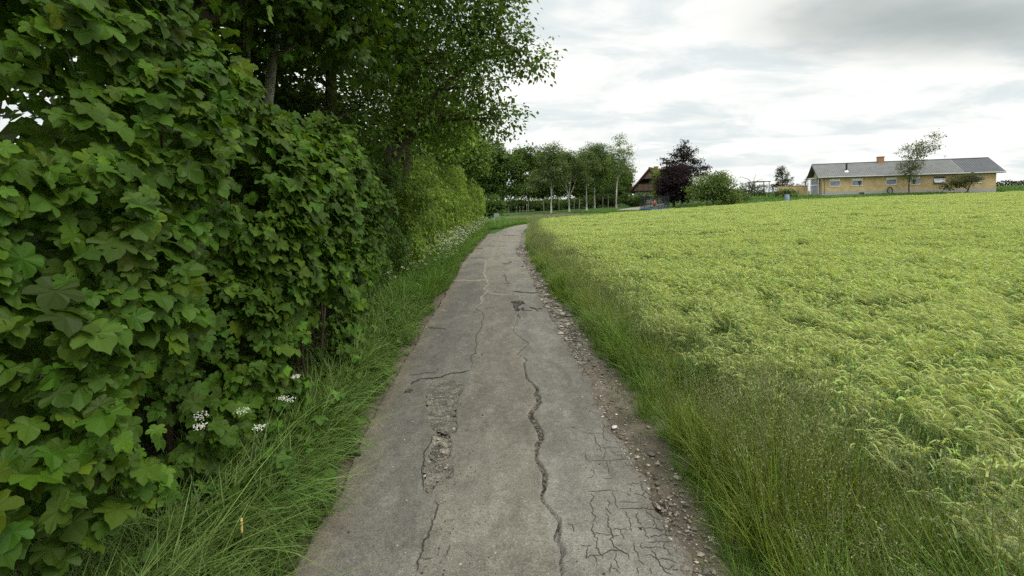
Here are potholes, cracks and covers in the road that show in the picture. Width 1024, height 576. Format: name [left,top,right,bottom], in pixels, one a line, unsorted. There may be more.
pothole [428,429,452,461]
pothole [422,452,453,494]
pothole [425,380,463,434]
crack [411,248,544,384]
crack [397,436,450,571]
crack [523,341,679,576]
